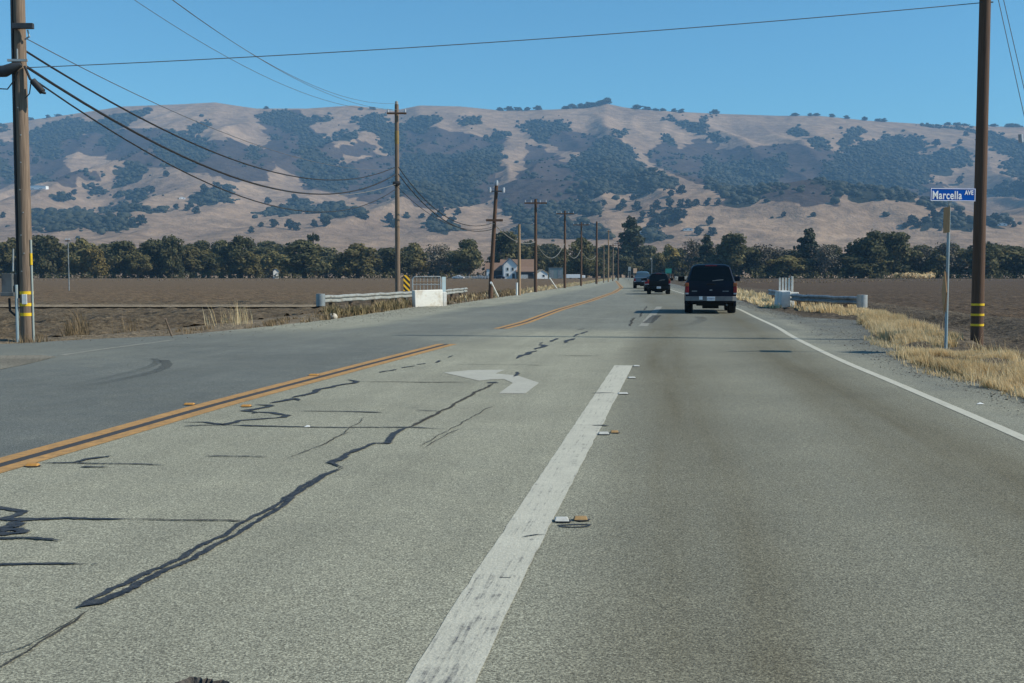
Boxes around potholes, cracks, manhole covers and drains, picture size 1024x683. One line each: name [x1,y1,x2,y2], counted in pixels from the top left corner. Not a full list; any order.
crack [46,456,160,467]
crack [417,407,489,446]
